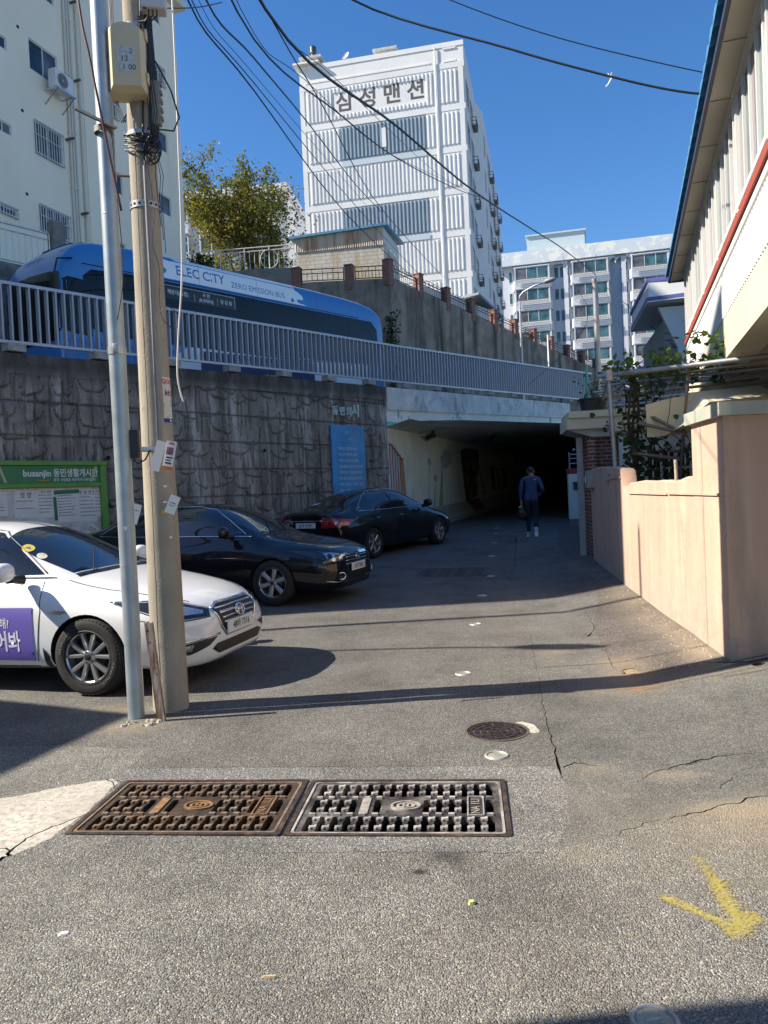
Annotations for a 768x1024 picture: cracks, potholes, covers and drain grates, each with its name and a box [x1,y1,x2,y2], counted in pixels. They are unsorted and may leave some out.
drain grate [64,779,309,837]
crack [616,752,768,836]
crack [0,814,85,861]
manhole cover [465,721,530,742]
drain grate [283,779,512,837]
drain grate [415,567,489,577]
